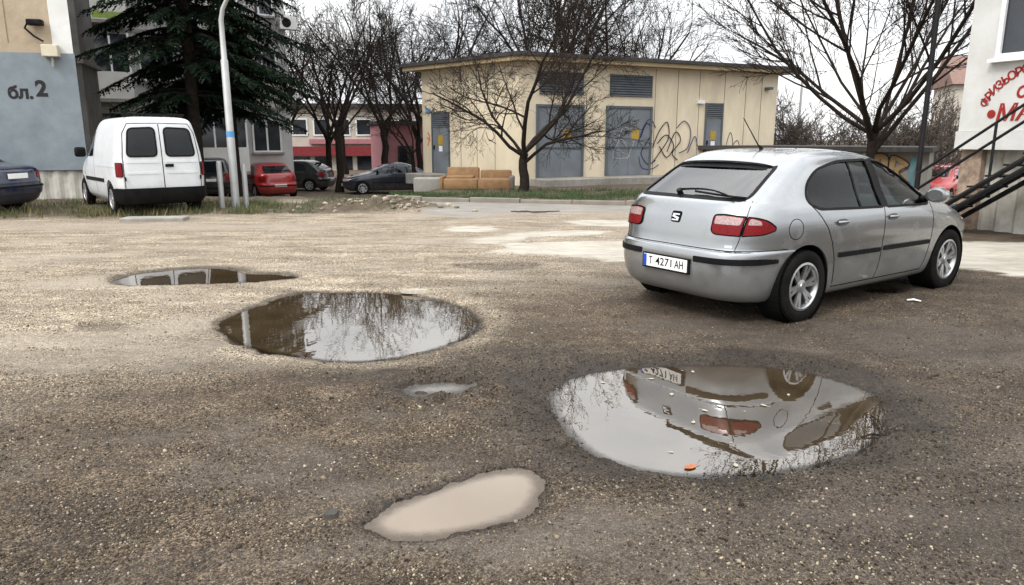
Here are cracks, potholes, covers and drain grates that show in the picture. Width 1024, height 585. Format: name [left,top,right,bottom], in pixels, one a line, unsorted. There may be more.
pothole [355,461,560,548]
pothole [539,359,908,482]
pothole [105,265,305,286]
pothole [390,374,484,400]
pothole [207,288,489,364]
